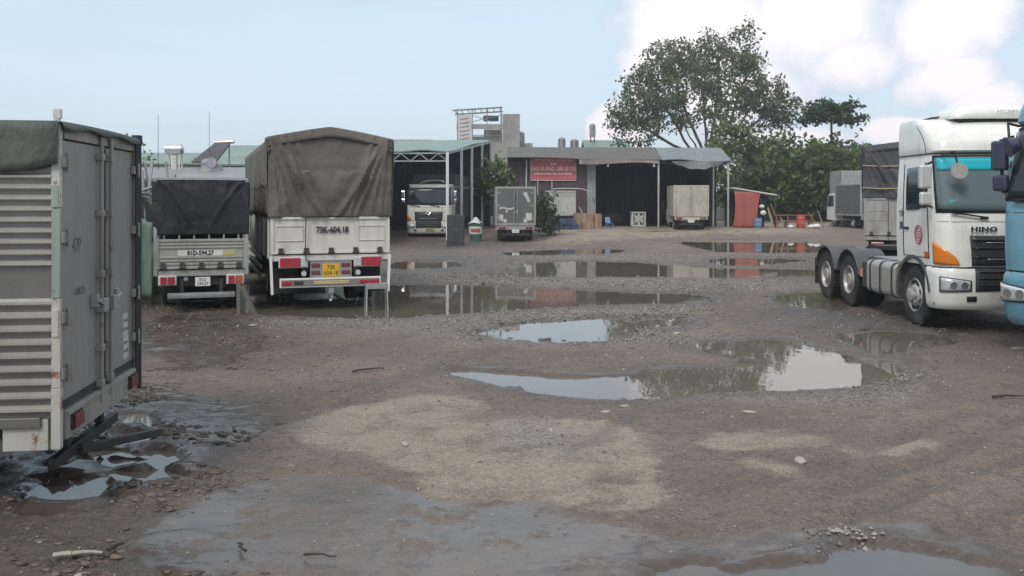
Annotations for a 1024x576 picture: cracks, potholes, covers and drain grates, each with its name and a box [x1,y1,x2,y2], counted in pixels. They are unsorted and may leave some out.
pothole [0,404,211,522]
pothole [464,313,709,344]
pothole [435,335,919,401]
pothole [560,528,1024,576]
